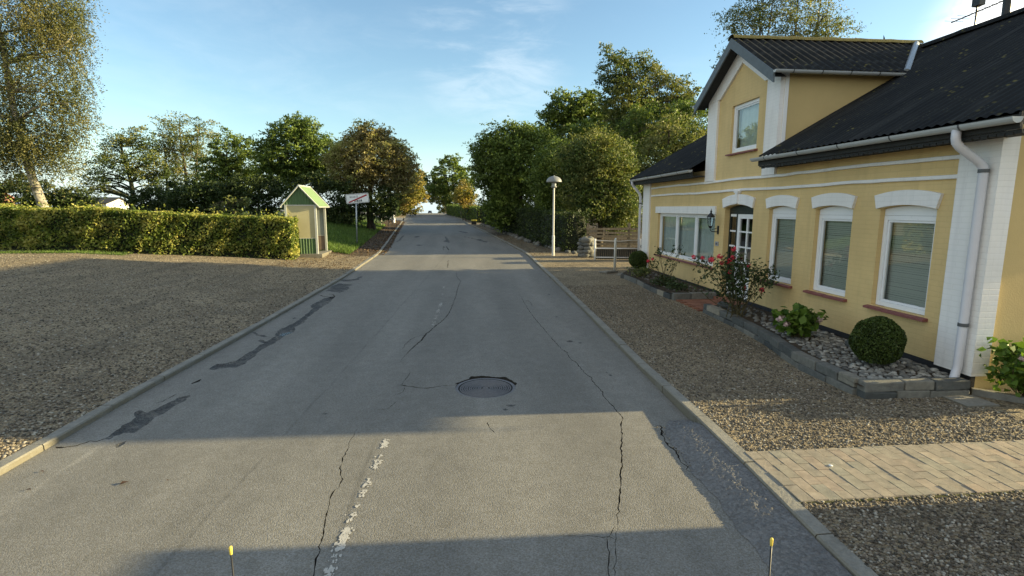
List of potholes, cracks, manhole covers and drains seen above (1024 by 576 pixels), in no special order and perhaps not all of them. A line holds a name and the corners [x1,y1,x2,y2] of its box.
manhole cover [455,378,516,398]
crack [522,299,623,576]
crack [382,246,461,410]
crack [313,434,355,576]
